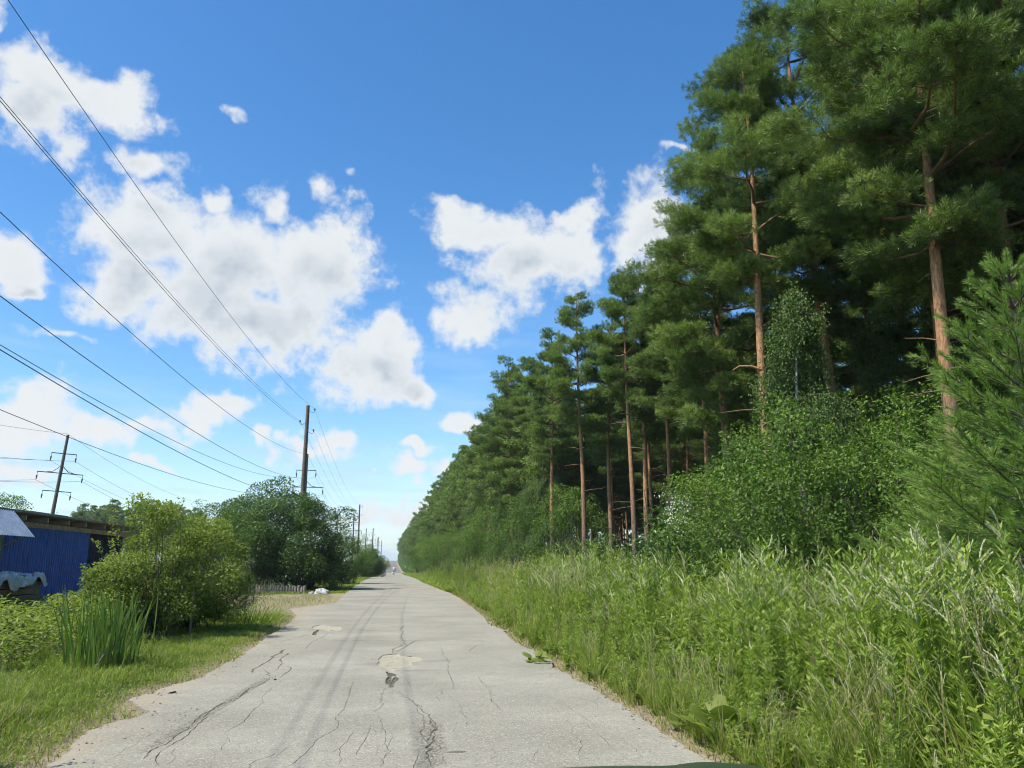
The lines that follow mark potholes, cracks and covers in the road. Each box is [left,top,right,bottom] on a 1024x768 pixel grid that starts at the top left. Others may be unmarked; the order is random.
crack [117,635,325,765]
crack [249,653,468,768]
crack [344,627,414,653]
